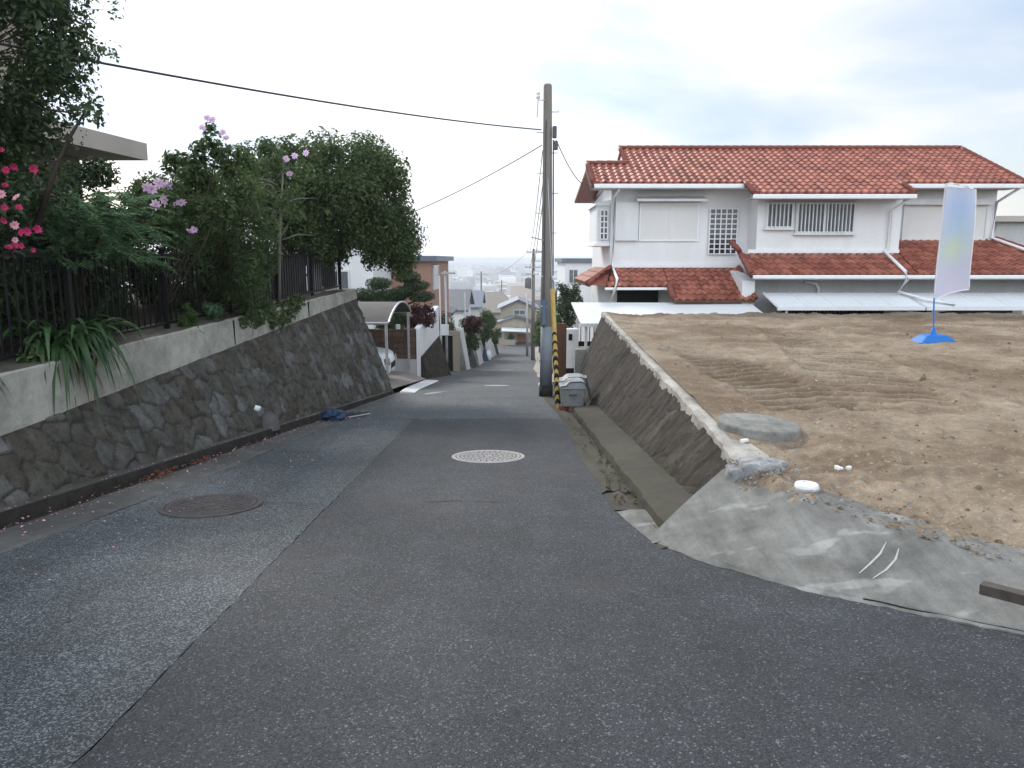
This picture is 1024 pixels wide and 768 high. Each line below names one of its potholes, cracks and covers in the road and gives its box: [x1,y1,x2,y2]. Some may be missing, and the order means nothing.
manhole cover [158,493,263,518]
manhole cover [452,450,525,463]
crack [863,598,1022,631]
